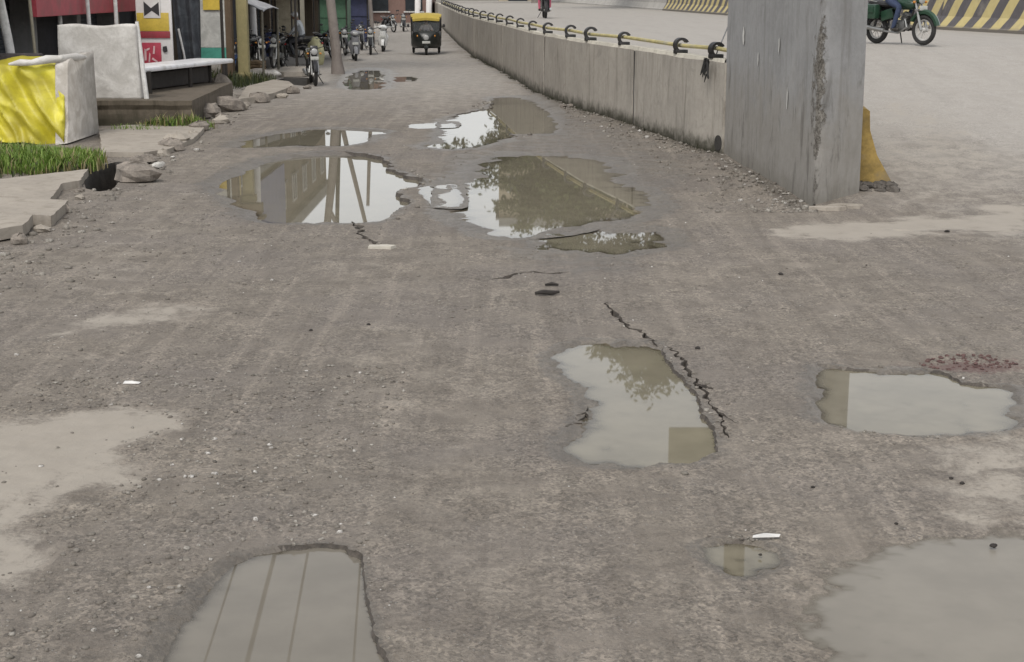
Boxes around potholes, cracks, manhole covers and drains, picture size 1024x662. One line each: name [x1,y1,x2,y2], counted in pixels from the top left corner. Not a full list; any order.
pothole [525,226,685,256]
crack [491,271,566,280]
pothole [336,67,393,90]
pothole [690,538,790,578]
pothole [143,543,389,662]
pothole [430,153,676,240]
crack [604,302,736,438]
pothole [805,364,1024,436]
pothole [199,151,424,224]
pothole [225,127,391,148]
pothole [543,338,718,470]
pothole [416,95,567,150]
